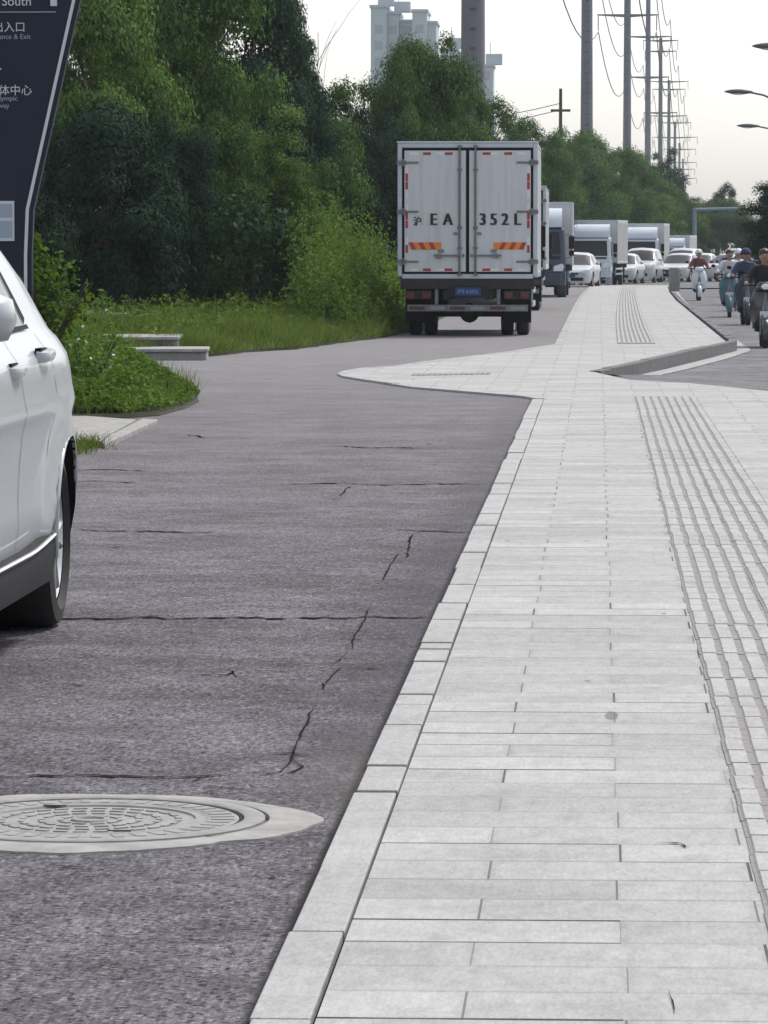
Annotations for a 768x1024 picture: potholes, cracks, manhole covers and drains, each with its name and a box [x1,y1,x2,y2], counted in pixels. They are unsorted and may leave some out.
manhole cover [0,794,324,855]
crack [3,772,242,789]
crack [294,483,469,500]
crack [62,529,468,774]
